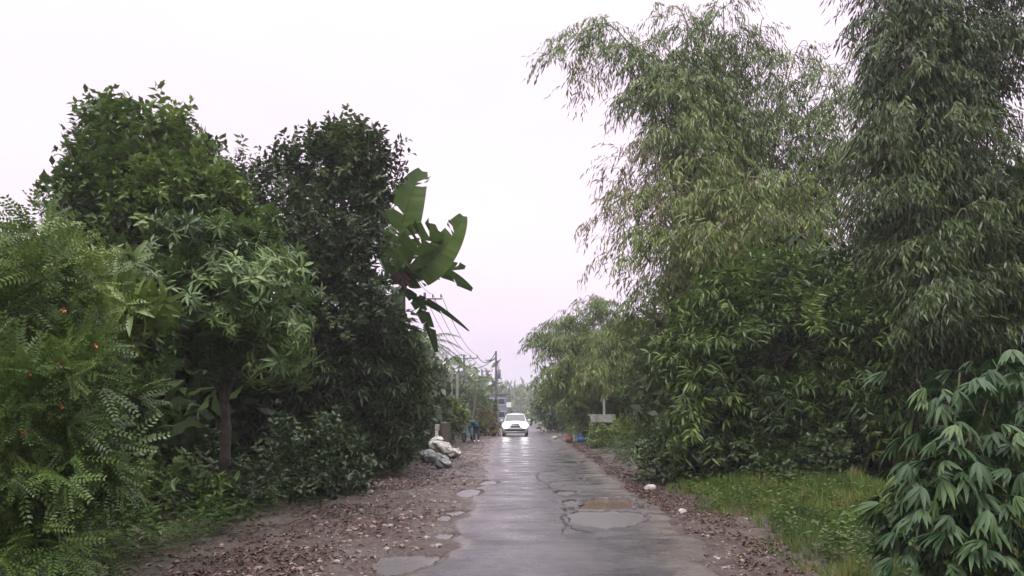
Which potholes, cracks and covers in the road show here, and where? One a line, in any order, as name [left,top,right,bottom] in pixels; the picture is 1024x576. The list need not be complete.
crack [560,514,593,533]
pothole [572,497,643,510]
